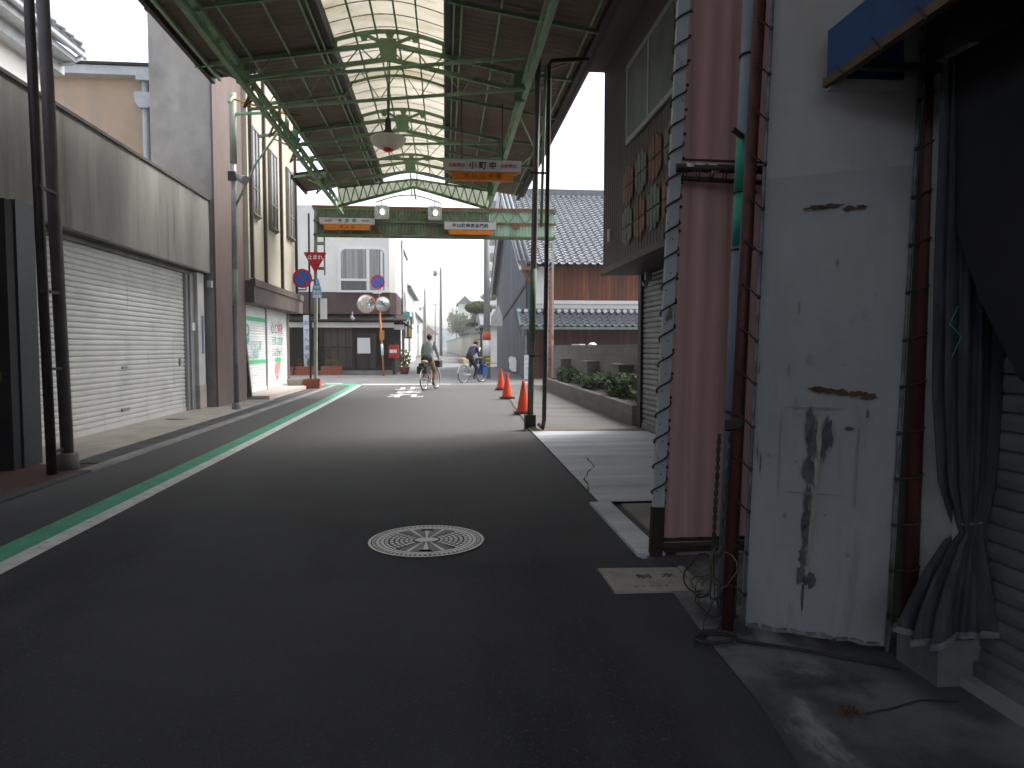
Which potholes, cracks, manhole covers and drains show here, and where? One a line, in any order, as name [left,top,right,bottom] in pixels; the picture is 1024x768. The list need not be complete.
manhole cover [368,525,484,558]
utility cover [598,566,704,594]
